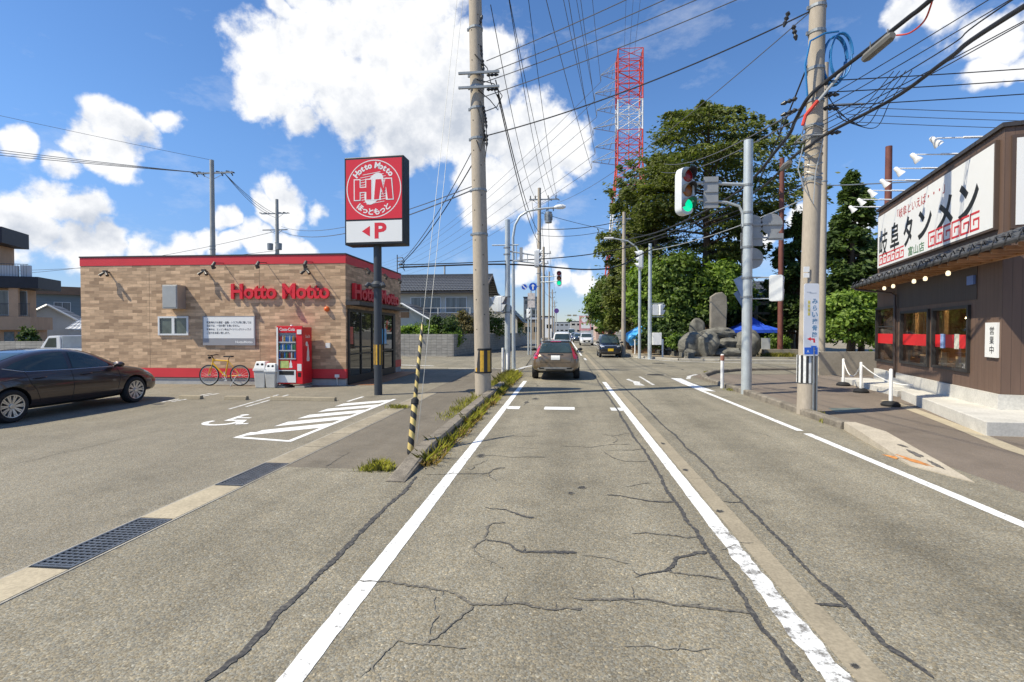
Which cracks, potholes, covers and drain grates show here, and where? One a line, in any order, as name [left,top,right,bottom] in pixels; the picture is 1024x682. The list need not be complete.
crack [359,522,749,681]
drain grate [31,518,172,570]
drain grate [215,463,289,486]
